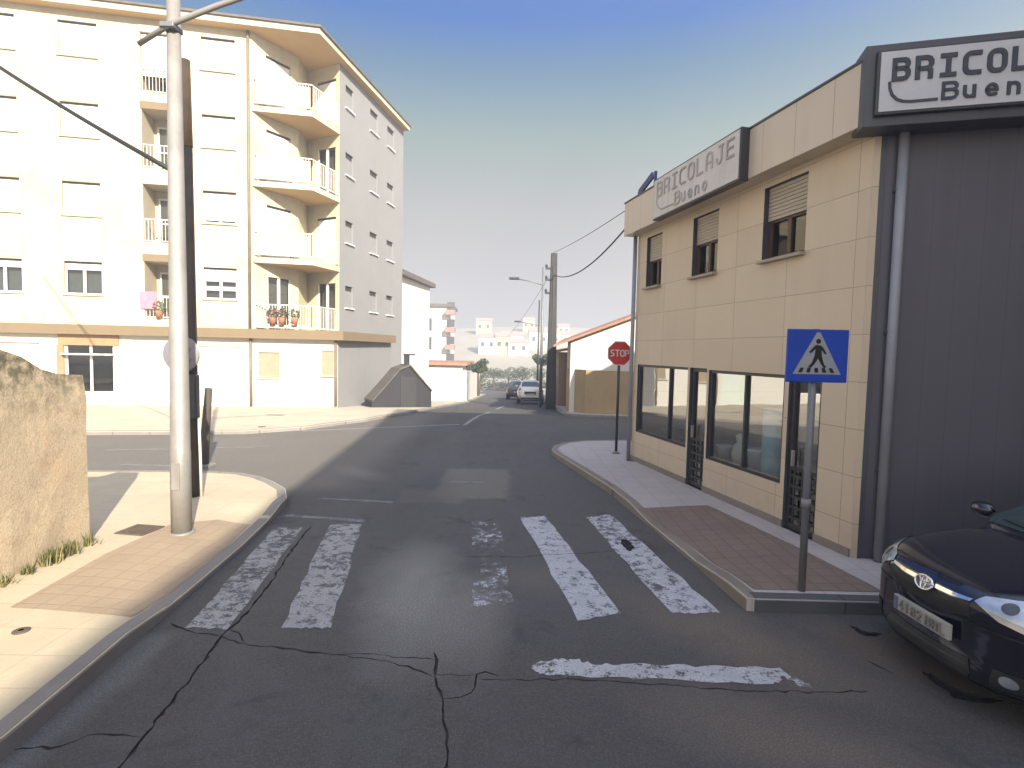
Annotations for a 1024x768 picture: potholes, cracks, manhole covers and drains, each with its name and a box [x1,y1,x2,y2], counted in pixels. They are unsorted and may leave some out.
crack [15,527,868,768]
utility cover [11,627,31,635]
